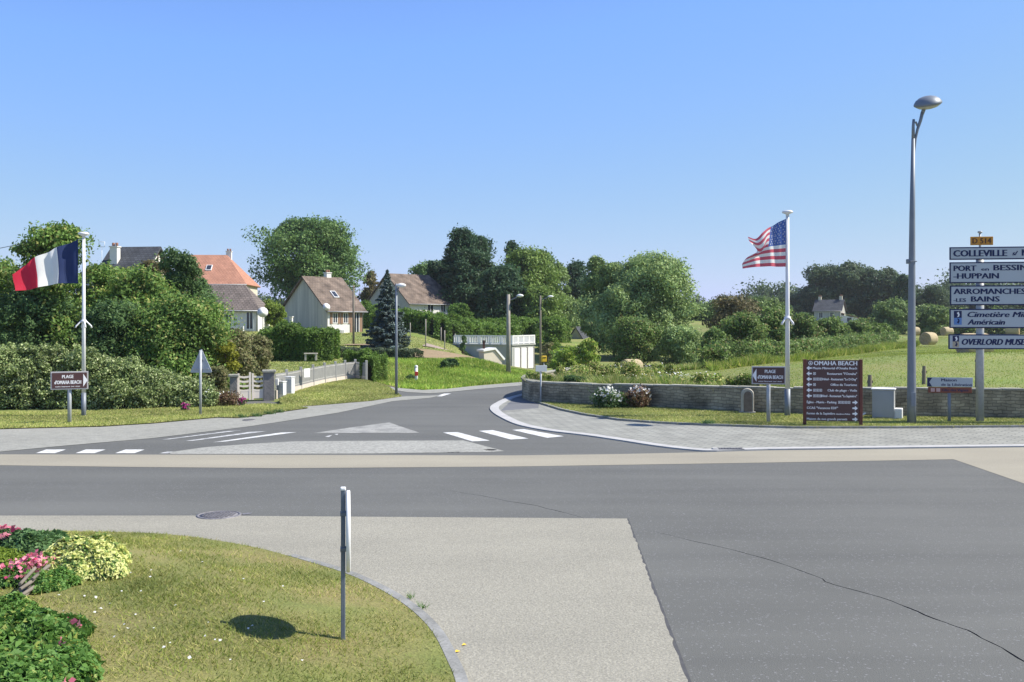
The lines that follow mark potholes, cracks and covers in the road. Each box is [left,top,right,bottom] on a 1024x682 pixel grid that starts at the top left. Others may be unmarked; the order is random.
crack [658,532,1024,662]
manhole cover [196,511,242,519]
